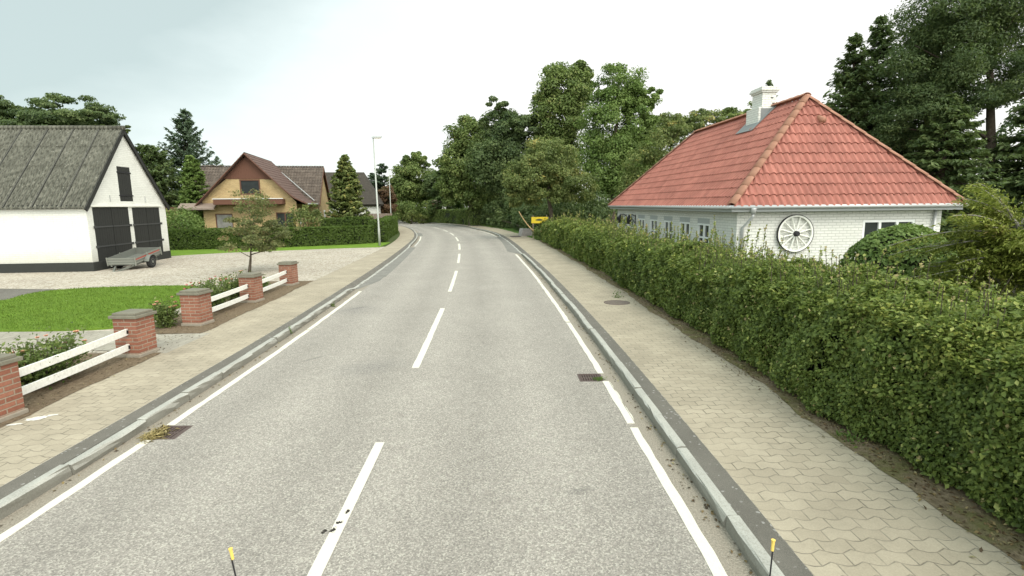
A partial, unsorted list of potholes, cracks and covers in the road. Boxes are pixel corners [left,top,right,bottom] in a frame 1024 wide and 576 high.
drain grate [577,374,604,382]
drain grate [140,425,193,440]
